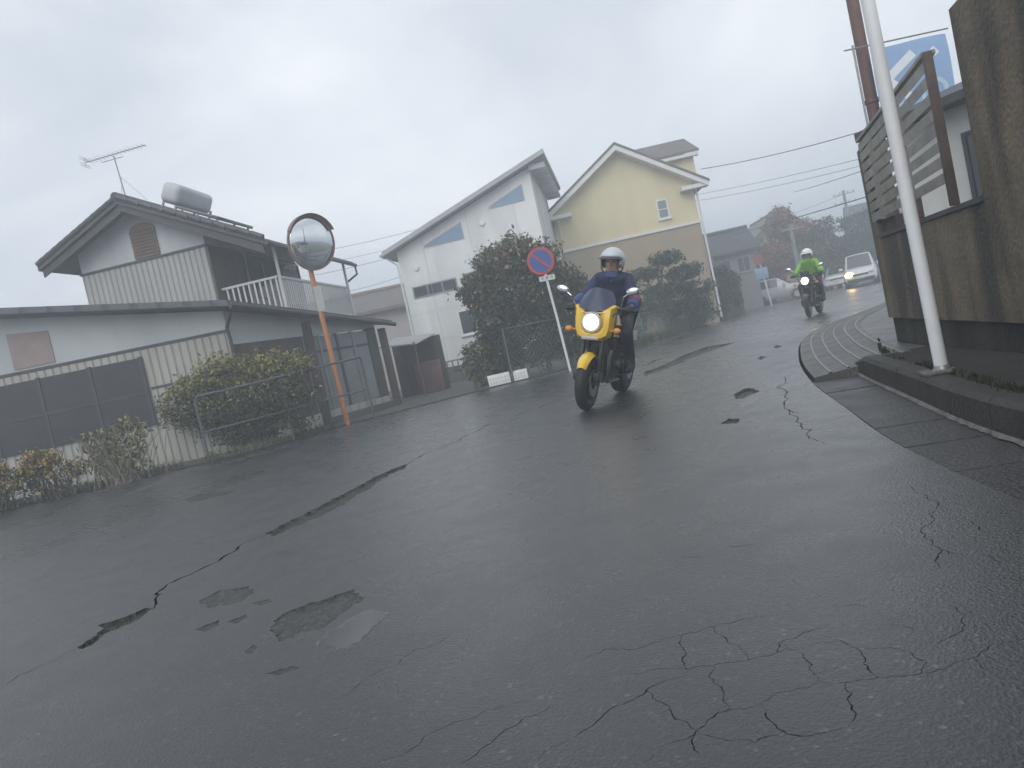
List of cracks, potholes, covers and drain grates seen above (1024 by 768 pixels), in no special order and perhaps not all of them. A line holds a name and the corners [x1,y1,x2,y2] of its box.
pothole [733,388,759,399]
pothole [266,666,300,675]
pothole [270,589,364,641]
crack [539,606,1023,762]
crack [376,700,553,764]
pothole [196,621,220,632]
crack [777,376,825,444]
pothole [199,586,254,608]
crack [895,480,963,570]
